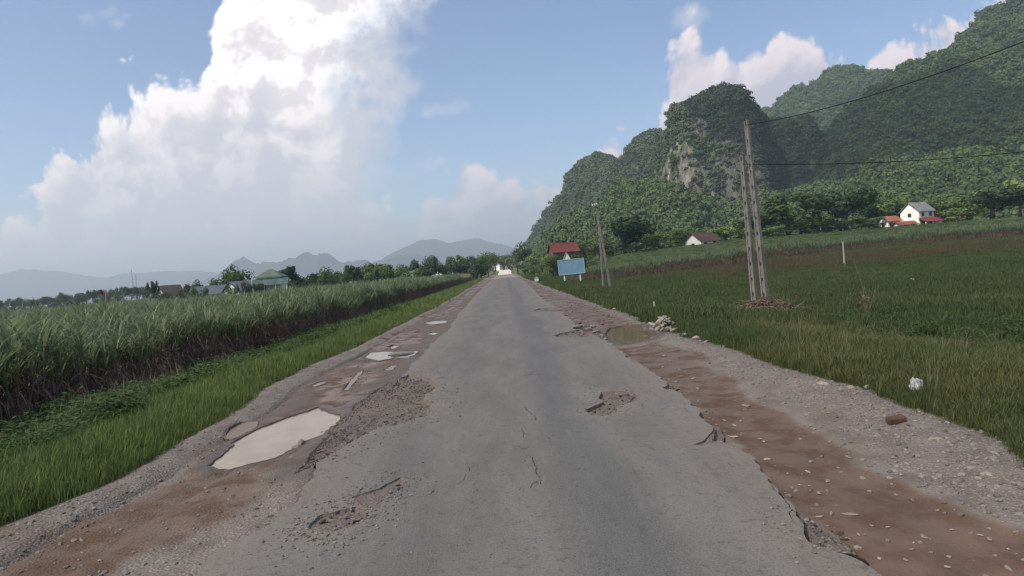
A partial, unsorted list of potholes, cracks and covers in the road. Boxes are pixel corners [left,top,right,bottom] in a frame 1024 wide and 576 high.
pothole [308,507,369,533]
pothole [344,370,363,391]
pothole [206,406,345,474]
pothole [298,375,438,473]
crack [837,551,870,567]
pothole [352,478,411,506]
pothole [606,325,656,345]
pothole [362,349,422,362]
pothole [585,391,639,416]
